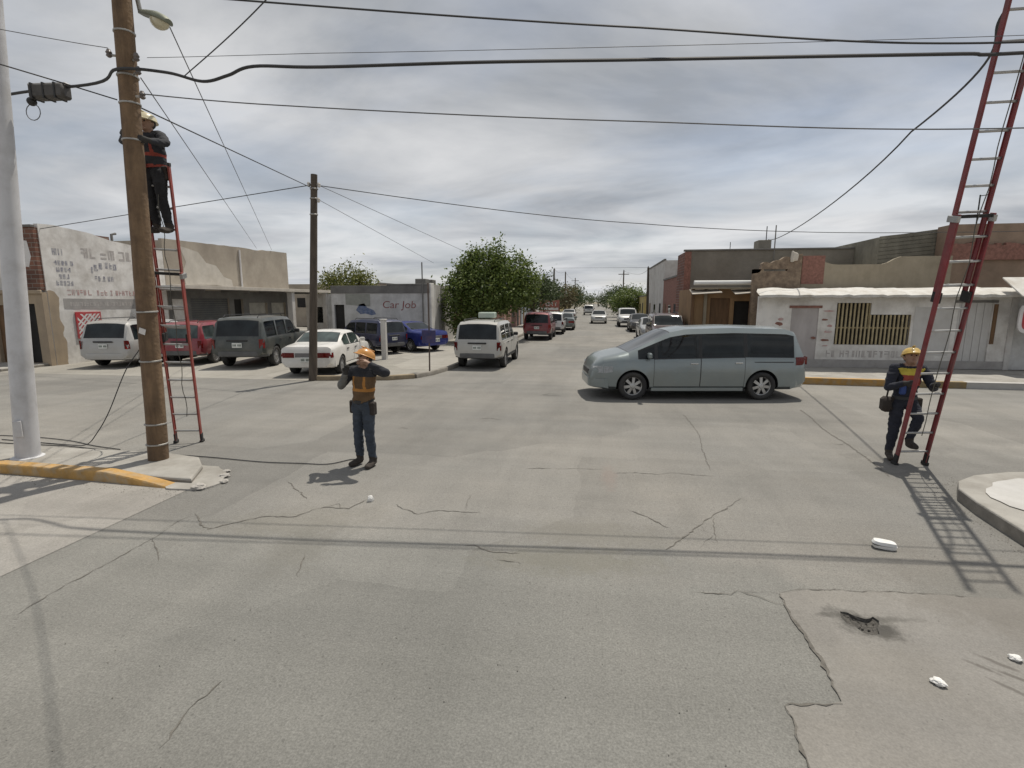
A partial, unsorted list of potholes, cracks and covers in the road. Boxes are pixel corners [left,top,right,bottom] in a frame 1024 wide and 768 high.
crack [633,415,710,476]
crack [629,500,738,549]
pothole [840,611,879,635]
crack [162,482,367,530]
crack [159,681,221,748]
